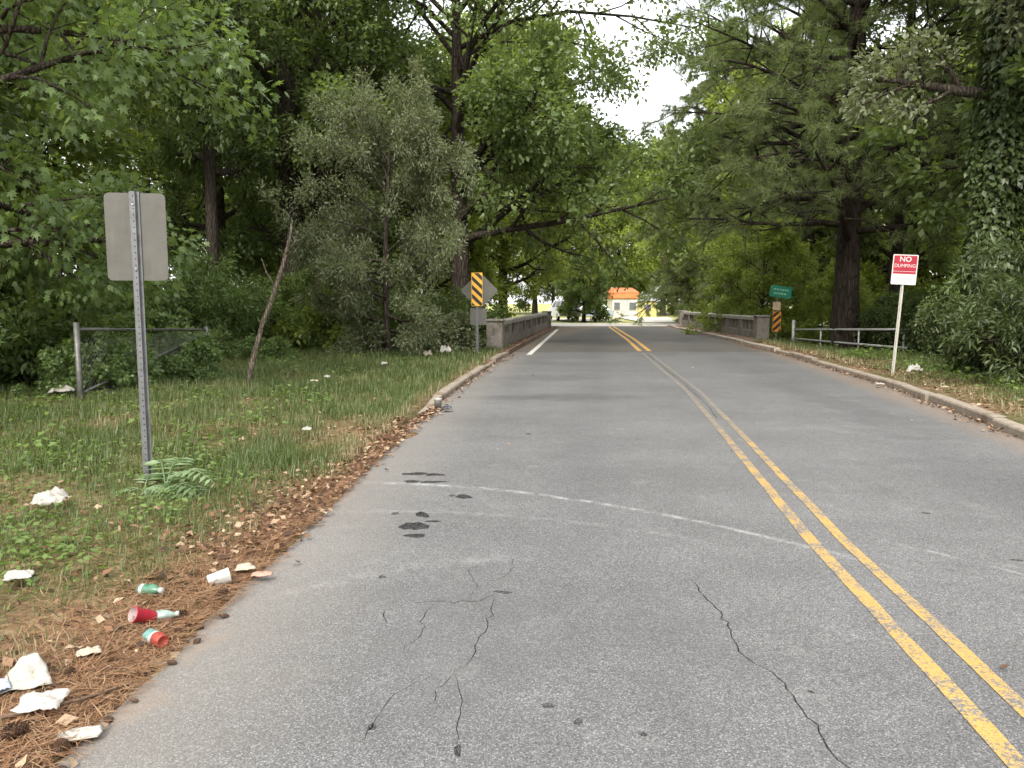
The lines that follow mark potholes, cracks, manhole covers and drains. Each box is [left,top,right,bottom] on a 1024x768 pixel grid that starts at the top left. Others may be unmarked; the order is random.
pothole [399,522,429,530]
crack [690,579,850,768]
